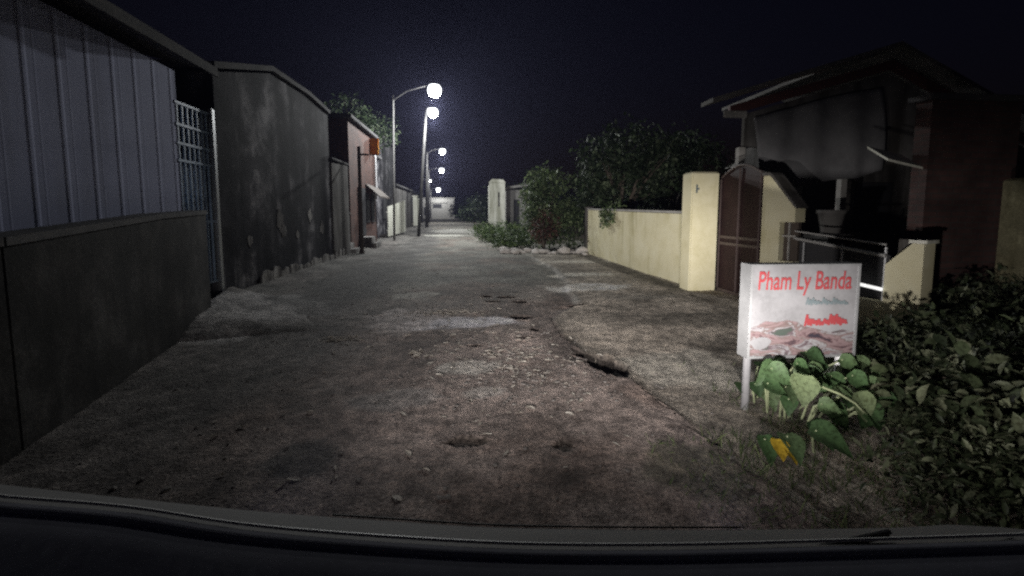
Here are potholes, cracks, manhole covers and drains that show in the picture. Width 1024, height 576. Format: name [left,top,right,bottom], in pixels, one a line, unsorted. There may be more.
pothole [431,431,501,453]
crack [624,378,719,445]
crack [526,299,582,350]
pothole [567,346,639,381]
pothole [504,313,539,321]
